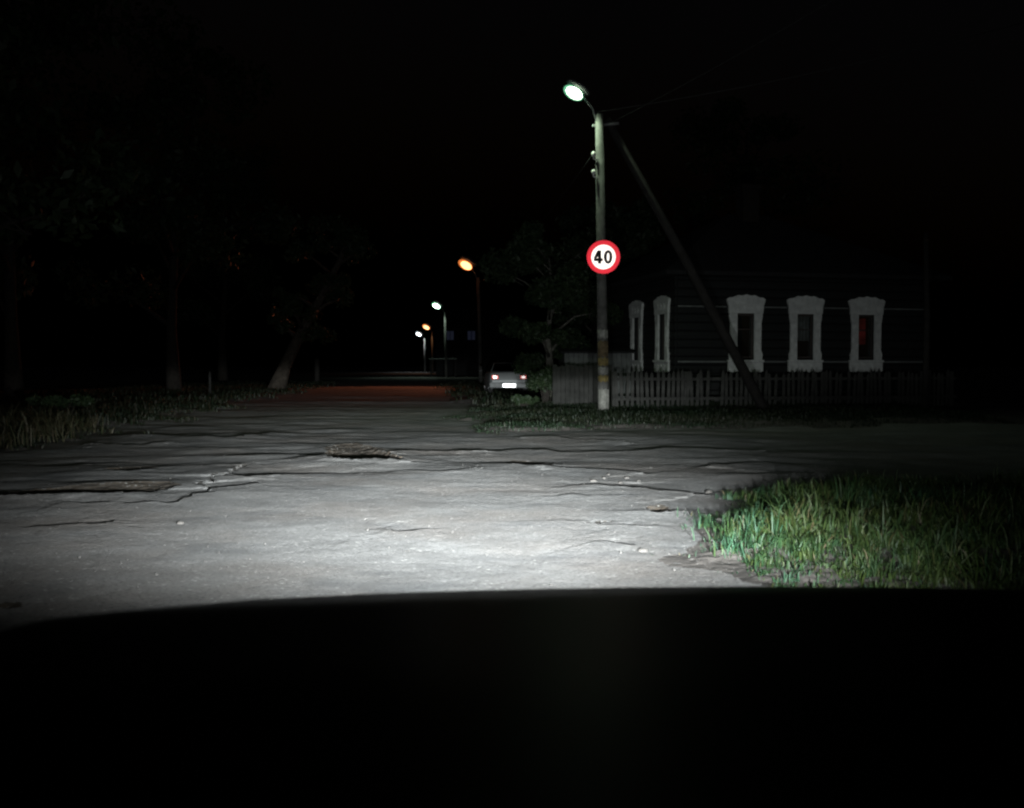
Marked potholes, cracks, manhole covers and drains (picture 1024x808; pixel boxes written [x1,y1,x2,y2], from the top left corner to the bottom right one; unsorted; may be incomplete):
pothole [0,481,181,495]
crack [70,463,256,502]
pothole [323,443,403,459]
